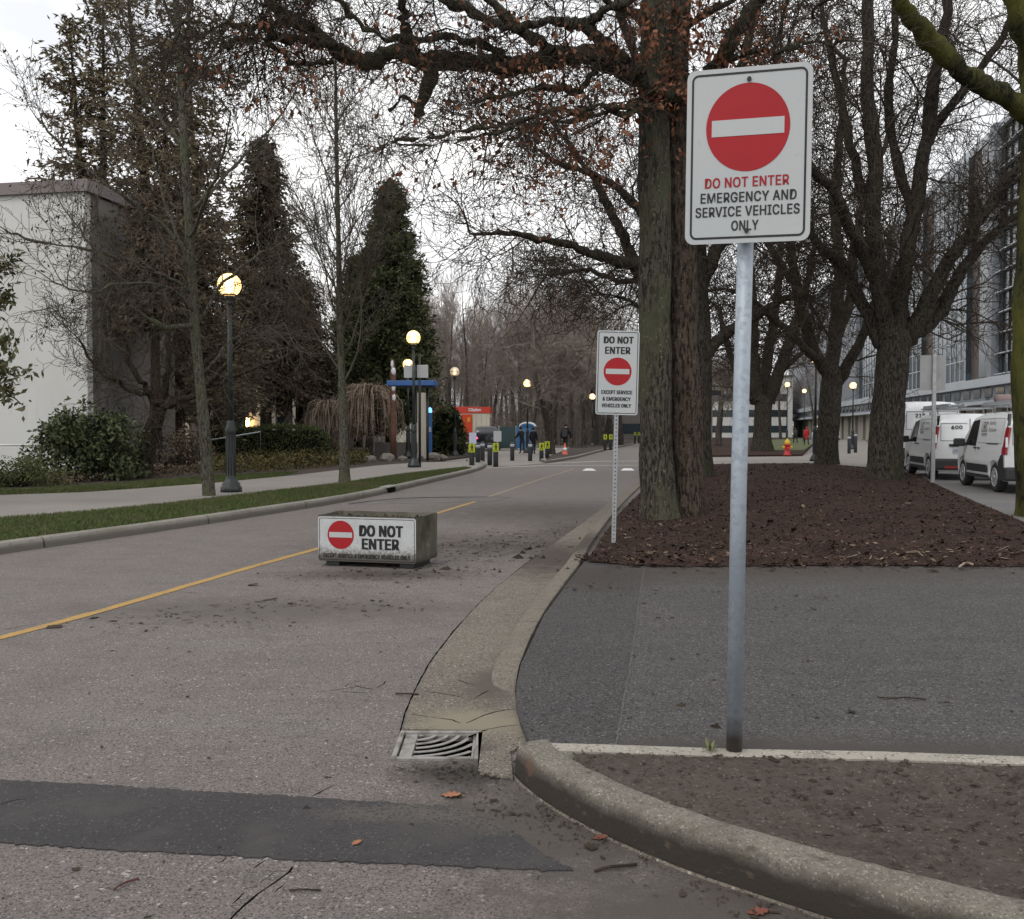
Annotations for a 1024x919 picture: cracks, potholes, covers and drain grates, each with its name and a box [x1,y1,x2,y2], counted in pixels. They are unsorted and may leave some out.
drain grate [391,731,478,761]
crack [218,858,293,919]
crack [413,679,520,738]
